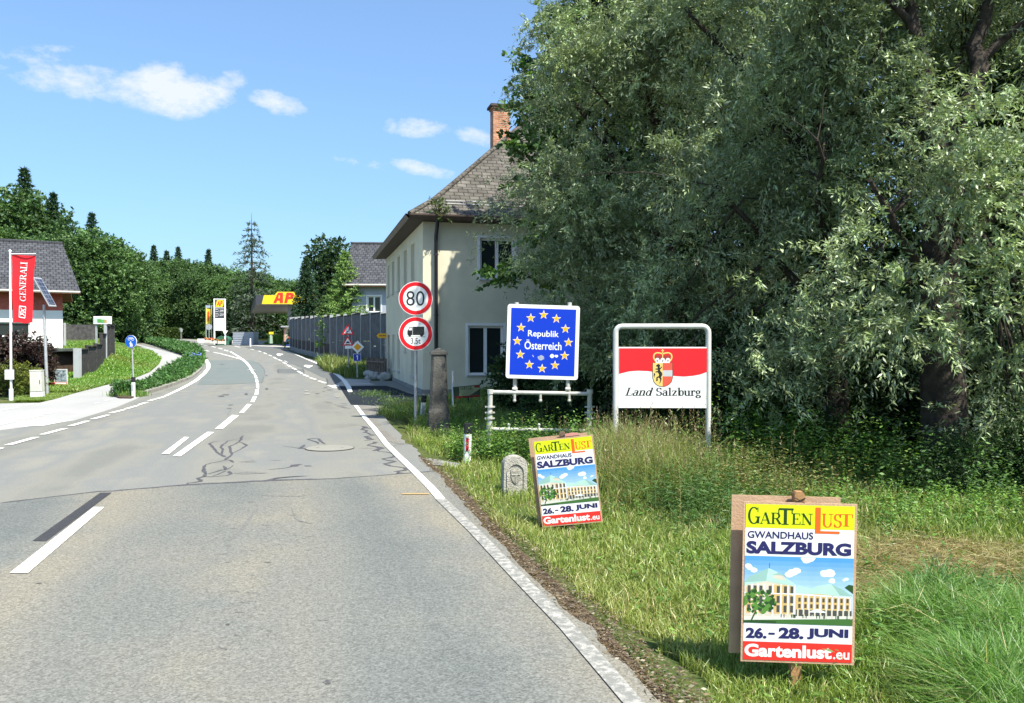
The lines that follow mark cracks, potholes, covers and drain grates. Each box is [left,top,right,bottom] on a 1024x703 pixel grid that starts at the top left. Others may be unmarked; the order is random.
crack [361,426,408,473]
crack [187,435,325,613]
